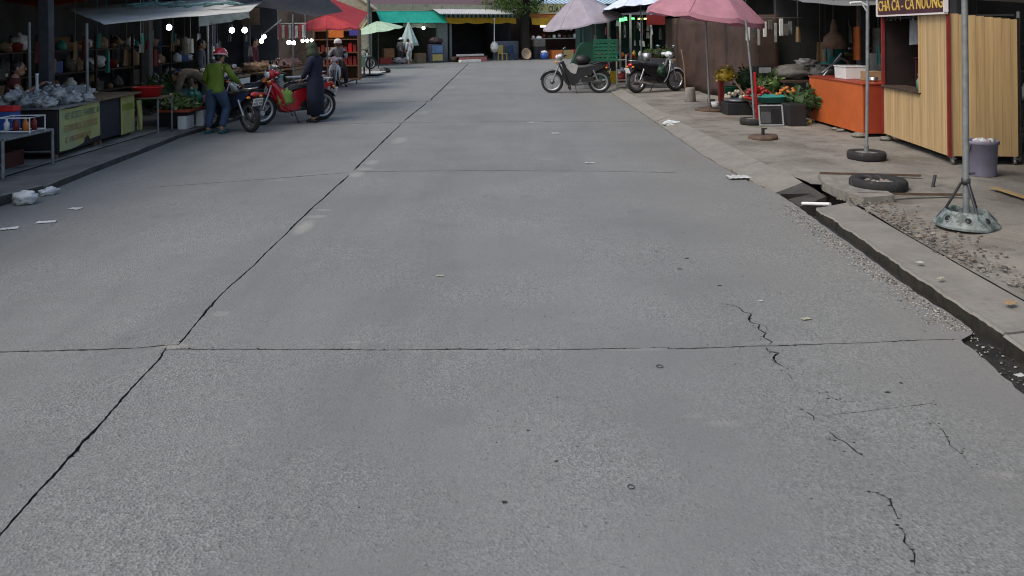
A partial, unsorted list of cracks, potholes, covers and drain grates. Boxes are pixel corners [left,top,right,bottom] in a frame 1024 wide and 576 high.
crack [865,490,916,566]
crack [0,303,978,468]
